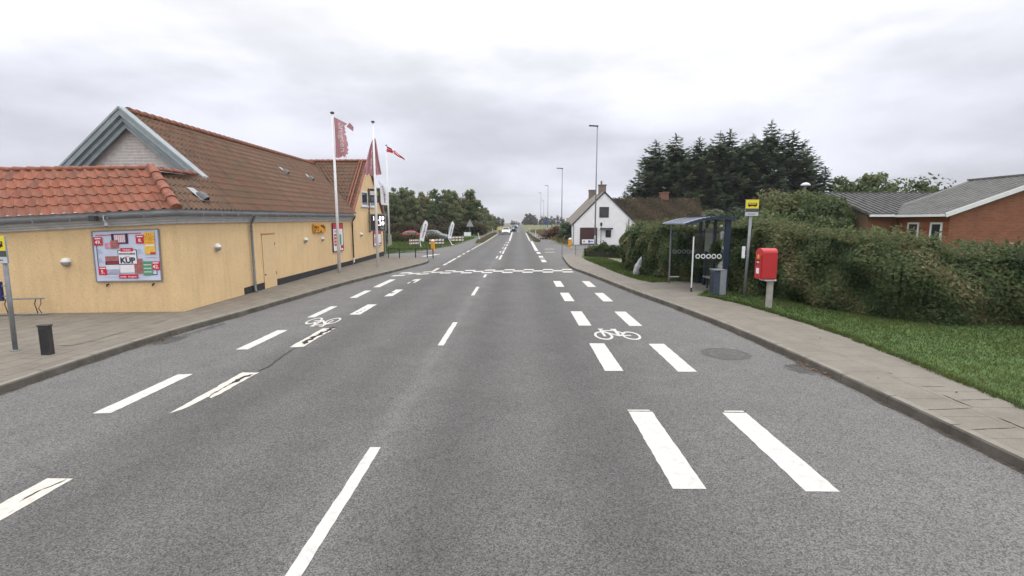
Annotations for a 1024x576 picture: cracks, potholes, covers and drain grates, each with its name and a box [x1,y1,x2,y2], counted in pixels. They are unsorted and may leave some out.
crack [208,327,336,398]
manhole cover [701,348,752,360]
